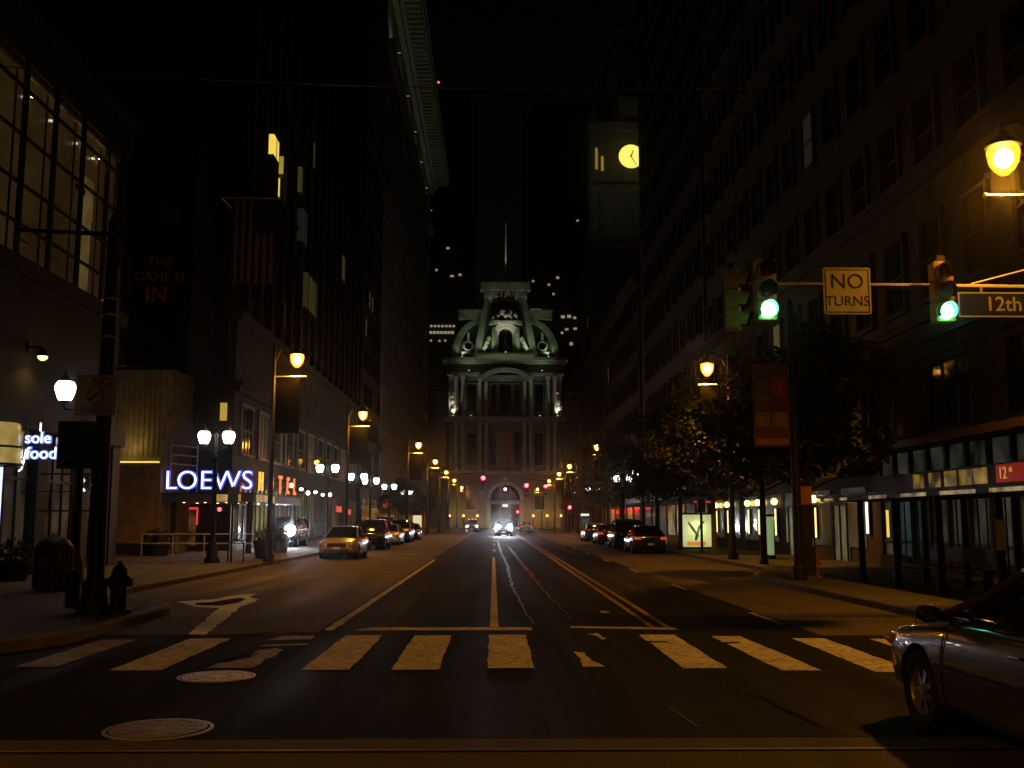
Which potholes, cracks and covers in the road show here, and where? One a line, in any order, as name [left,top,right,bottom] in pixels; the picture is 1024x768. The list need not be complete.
manhole cover [176,671,256,683]
manhole cover [101,718,214,741]
